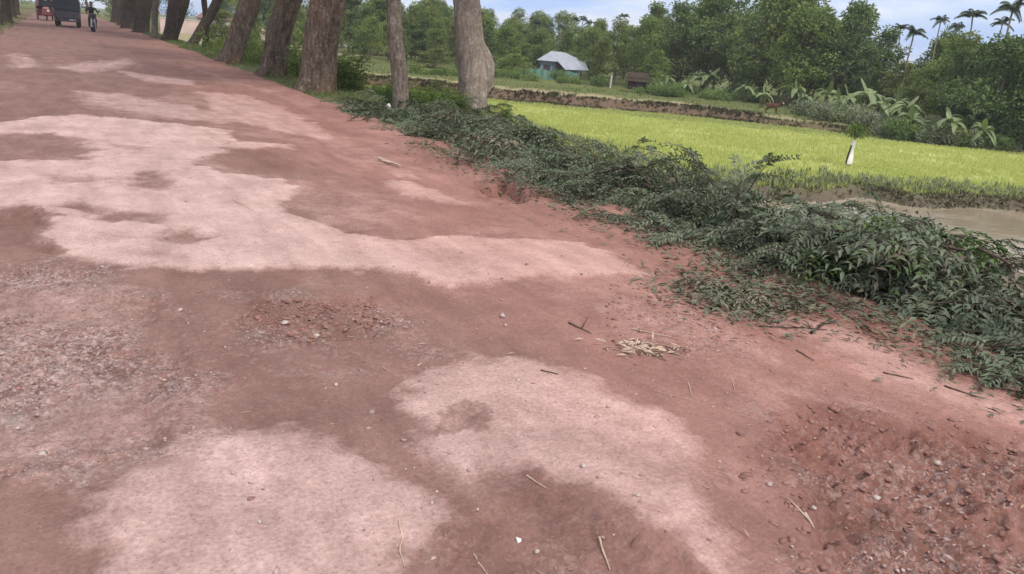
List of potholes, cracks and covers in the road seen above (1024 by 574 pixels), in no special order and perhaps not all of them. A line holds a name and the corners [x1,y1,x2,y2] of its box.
pothole [213,289,411,352]
